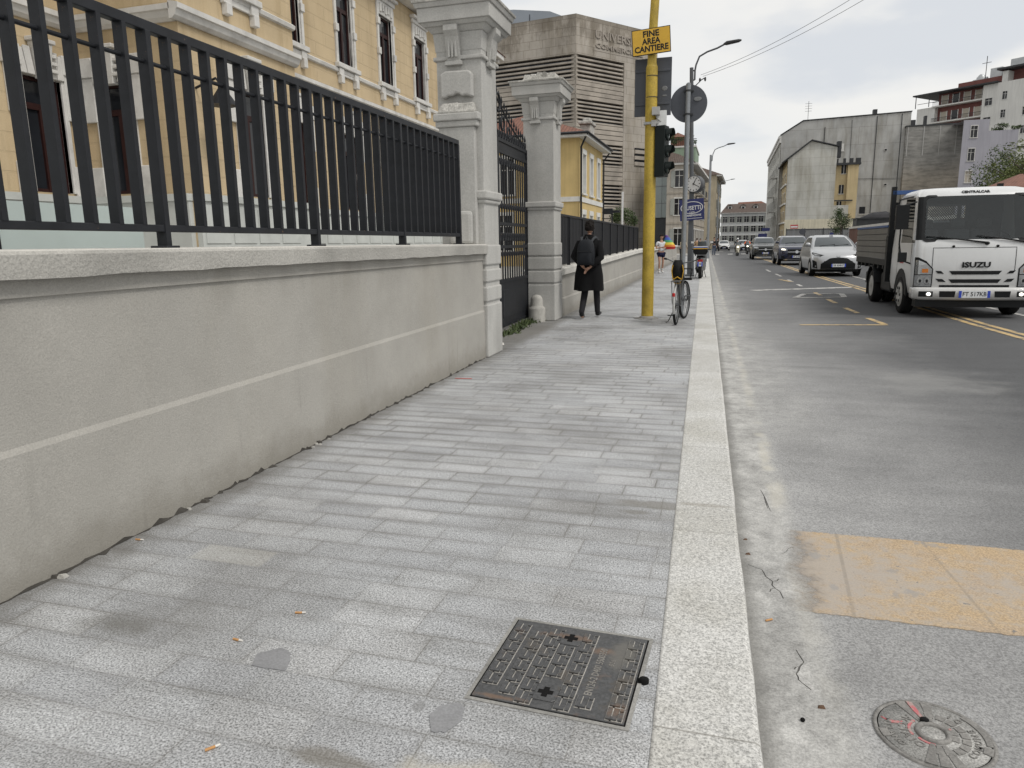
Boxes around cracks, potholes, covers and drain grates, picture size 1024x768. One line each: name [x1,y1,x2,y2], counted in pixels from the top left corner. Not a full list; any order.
manhole cover [872,700,999,768]
manhole cover [464,617,653,732]
